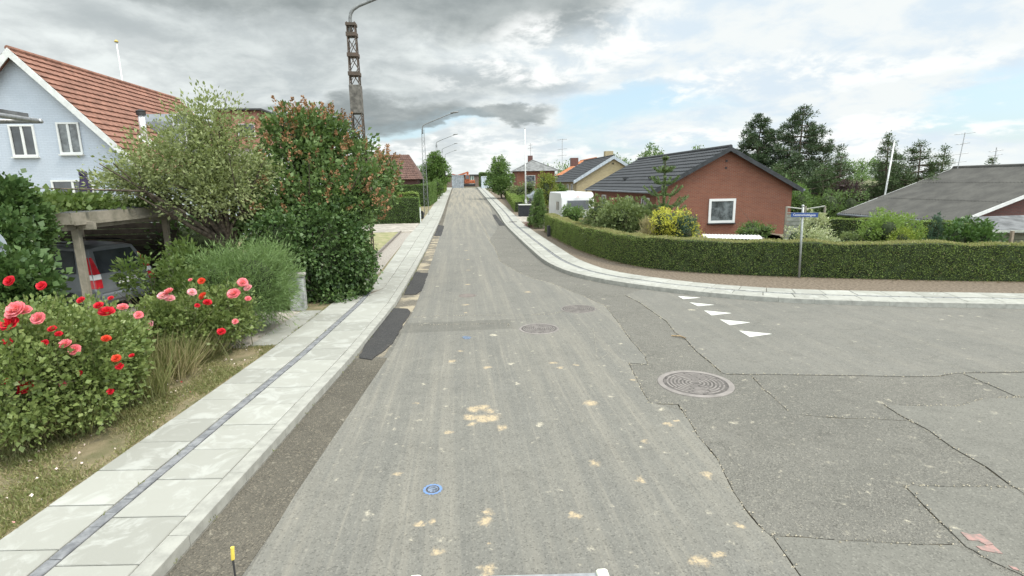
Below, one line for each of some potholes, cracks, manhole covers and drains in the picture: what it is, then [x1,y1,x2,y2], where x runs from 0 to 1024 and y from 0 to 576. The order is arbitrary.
manhole cover [561,305,596,313]
manhole cover [519,323,559,334]
manhole cover [657,370,735,398]
